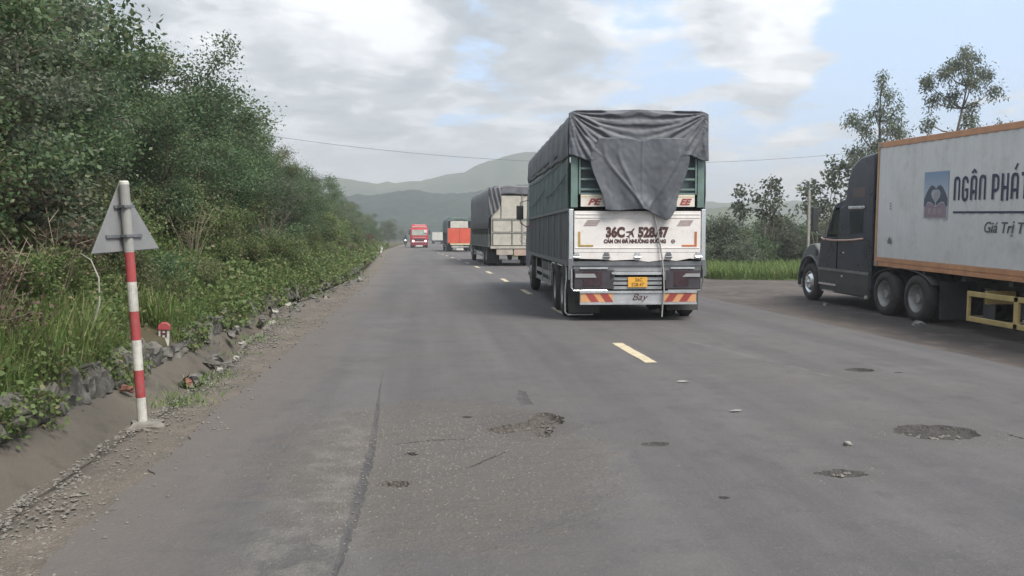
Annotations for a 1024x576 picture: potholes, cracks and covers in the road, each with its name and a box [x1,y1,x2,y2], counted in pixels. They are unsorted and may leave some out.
crack [393,438,510,470]
pothole [813,469,869,478]
pothole [893,425,981,441]
pothole [376,480,409,488]
pothole [487,412,565,438]
